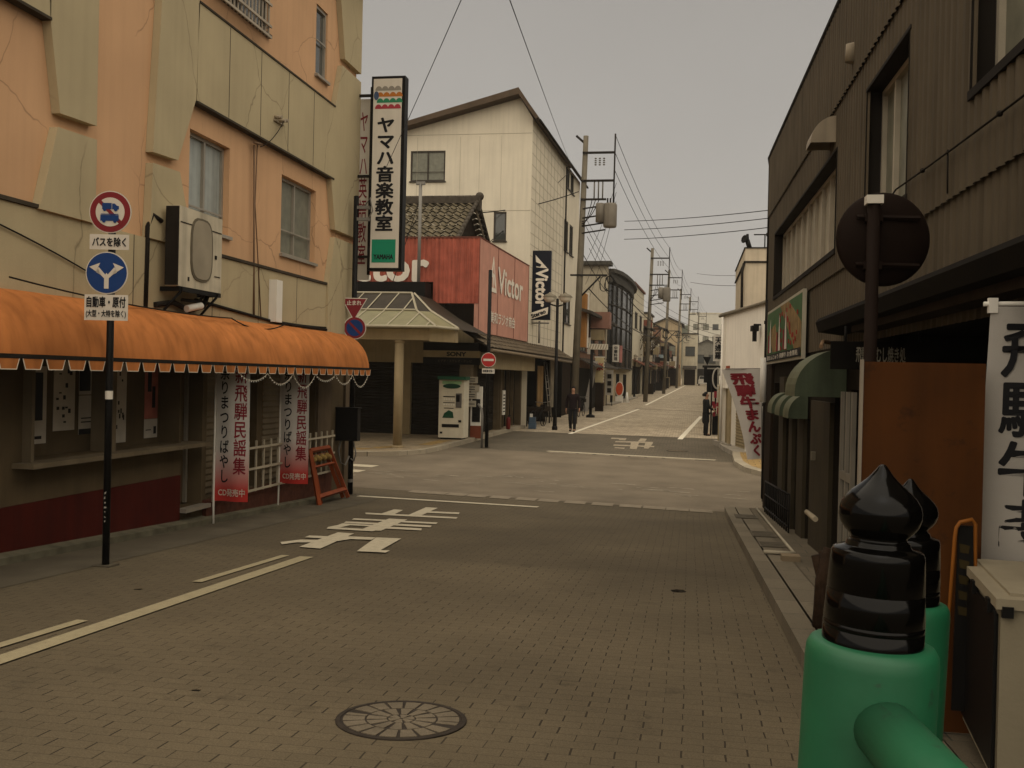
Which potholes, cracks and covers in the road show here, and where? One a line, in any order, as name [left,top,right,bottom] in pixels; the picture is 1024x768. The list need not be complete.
manhole cover [335,700,467,741]
